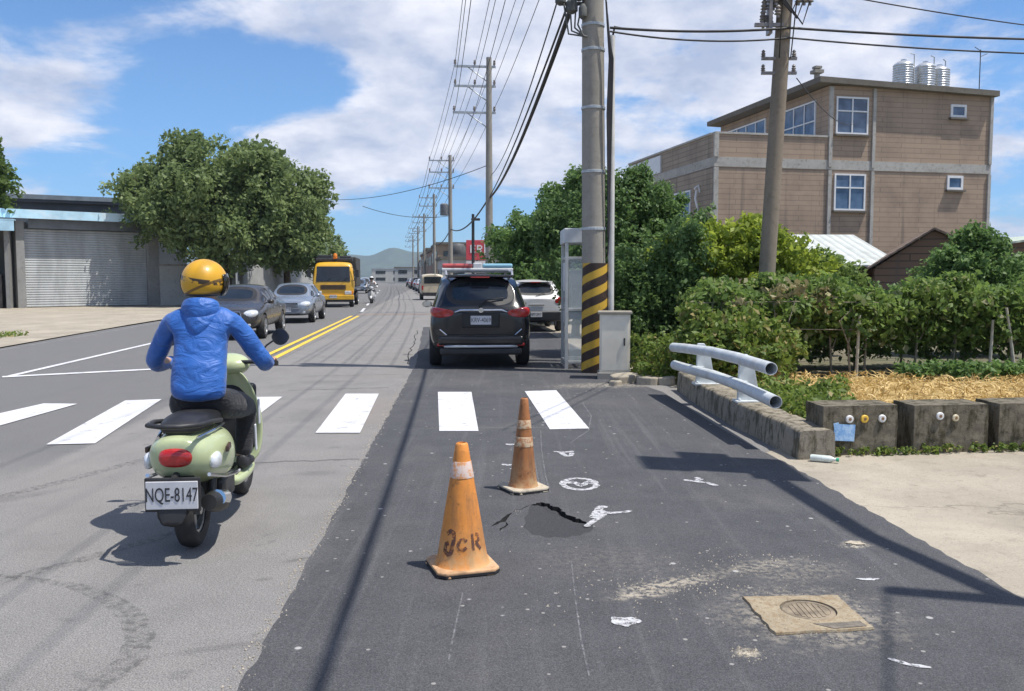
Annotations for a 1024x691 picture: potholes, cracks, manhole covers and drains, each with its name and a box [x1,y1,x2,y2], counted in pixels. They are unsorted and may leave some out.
pothole [523,505,593,538]
manhole cover [742,595,874,635]
